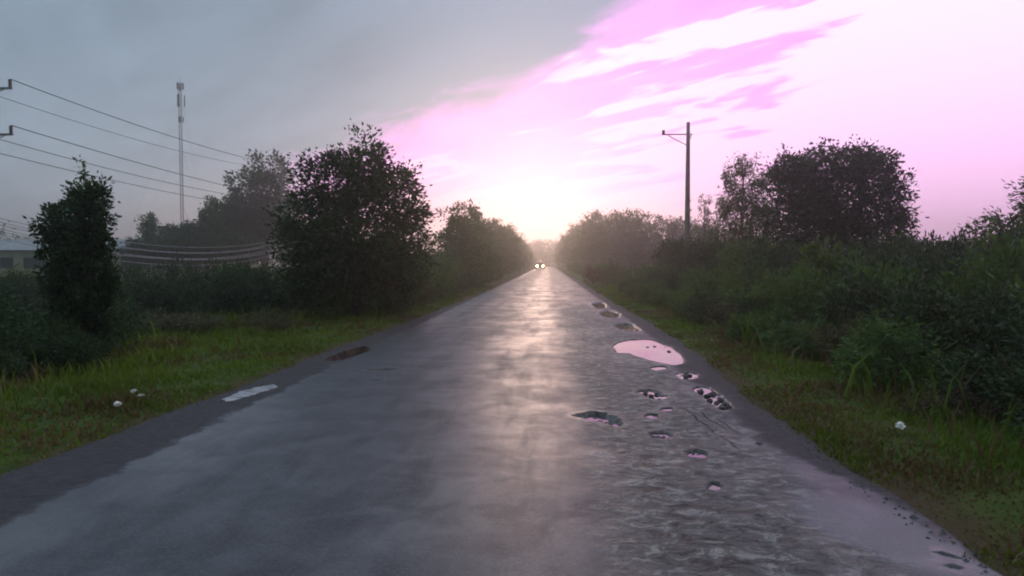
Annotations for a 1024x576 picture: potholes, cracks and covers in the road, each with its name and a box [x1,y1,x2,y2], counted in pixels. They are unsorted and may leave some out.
pothole [598,310,621,318]
pothole [613,323,642,332]
pothole [324,346,370,361]
pothole [571,410,624,427]
pothole [684,448,710,458]
crack [684,408,740,449]
pothole [673,371,699,379]
pothole [647,431,675,439]
pothole [692,385,735,410]
pothole [612,338,685,365]
pothole [704,480,725,490]
pothole [636,389,670,400]
